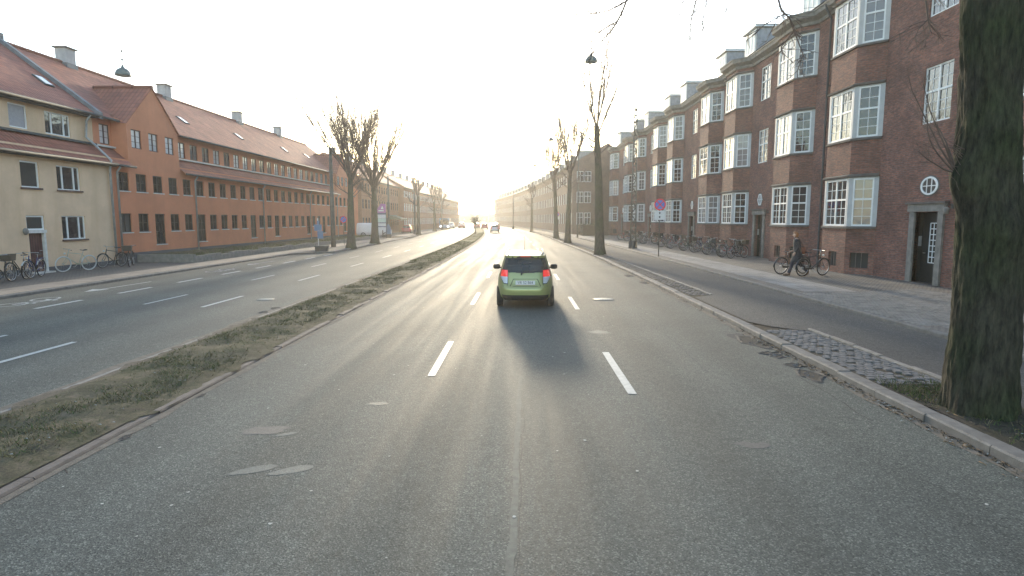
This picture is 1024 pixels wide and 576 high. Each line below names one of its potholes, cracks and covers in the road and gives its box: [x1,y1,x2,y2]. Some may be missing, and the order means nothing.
pothole [757,351,787,359]
pothole [735,335,777,349]
pothole [793,369,828,383]
